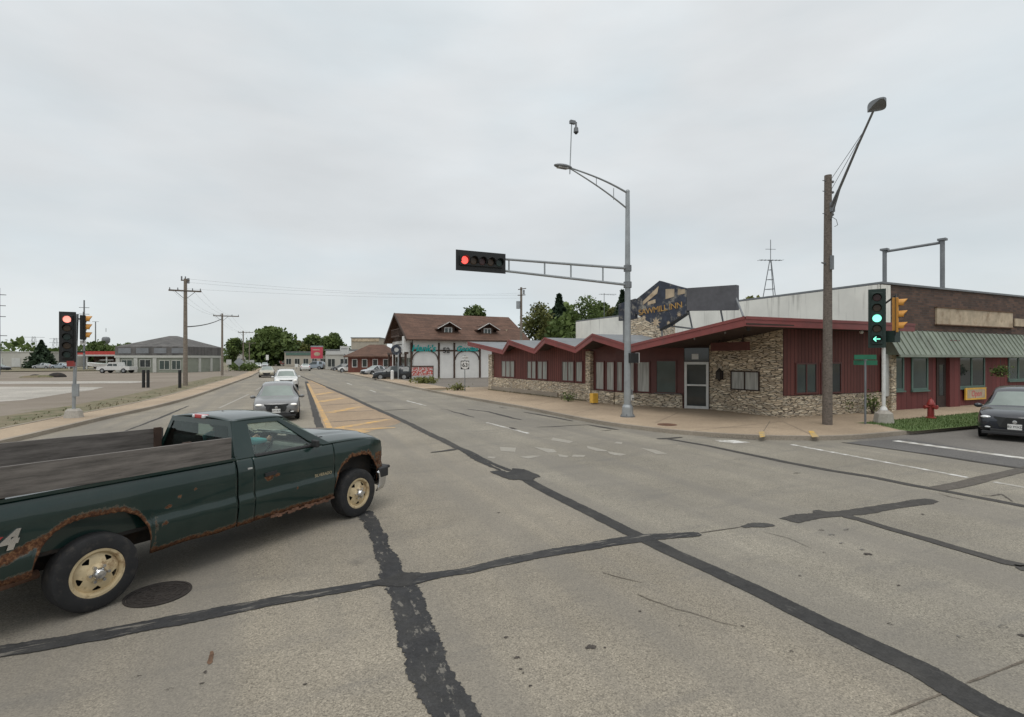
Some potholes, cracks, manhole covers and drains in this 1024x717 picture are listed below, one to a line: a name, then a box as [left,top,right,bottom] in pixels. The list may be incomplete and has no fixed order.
crack [603,572,737,626]
manhole cover [122,581,192,608]
